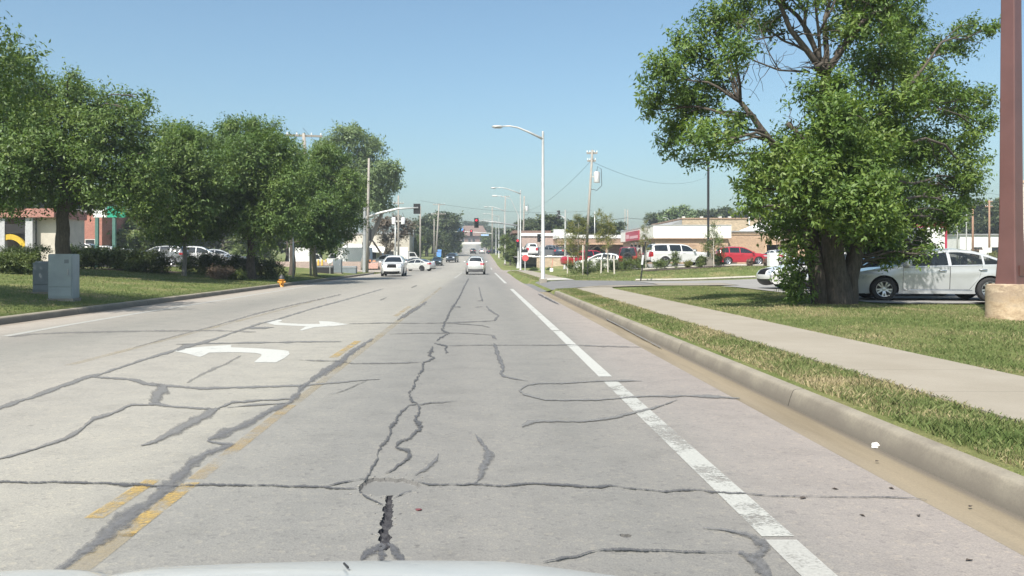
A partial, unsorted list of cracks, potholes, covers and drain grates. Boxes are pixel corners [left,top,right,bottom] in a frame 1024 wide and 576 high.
crack [56,280,527,570]
crack [705,527,772,576]
pothole [358,477,421,496]
